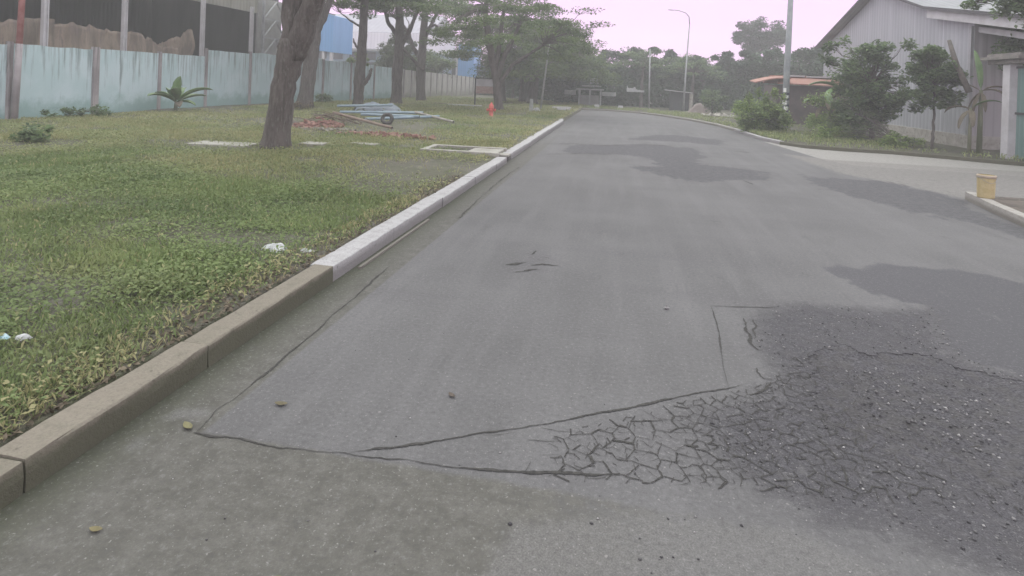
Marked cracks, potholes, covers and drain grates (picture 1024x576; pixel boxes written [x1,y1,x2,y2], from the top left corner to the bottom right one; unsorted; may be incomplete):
crack [194,267,1023,517]
crack [506,251,558,272]
drain grate [420,144,511,157]
